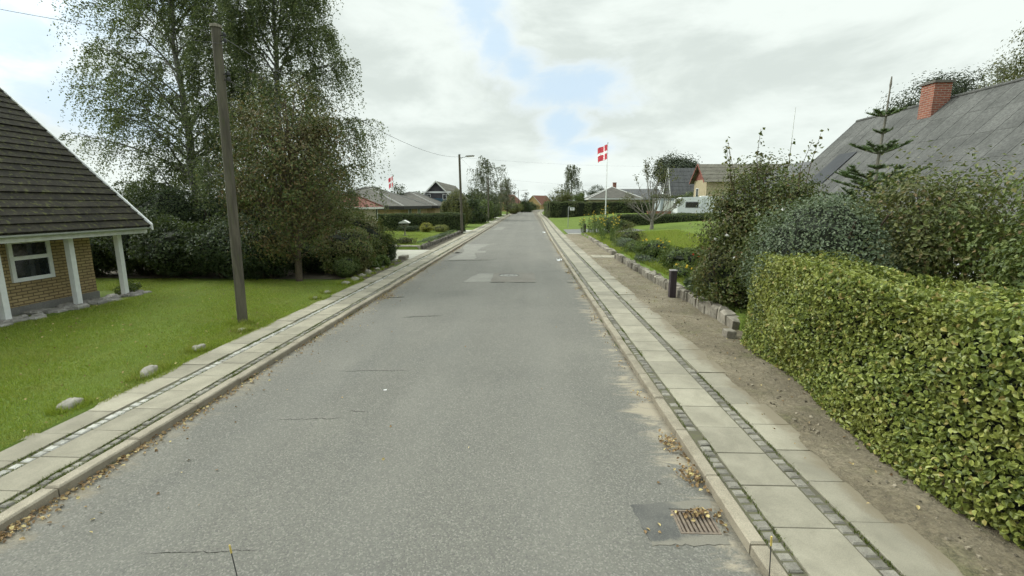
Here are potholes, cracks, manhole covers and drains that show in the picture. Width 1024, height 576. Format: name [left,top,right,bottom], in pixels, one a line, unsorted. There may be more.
drain grate [670,510,722,535]
